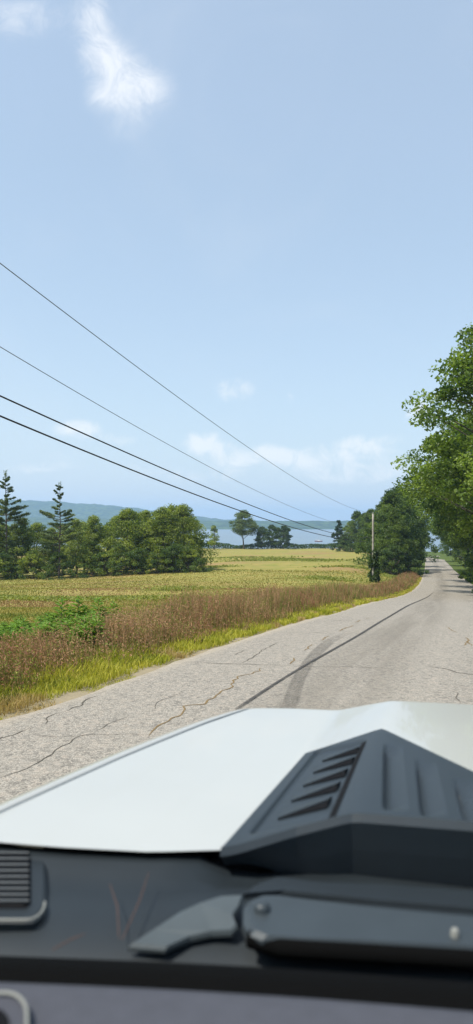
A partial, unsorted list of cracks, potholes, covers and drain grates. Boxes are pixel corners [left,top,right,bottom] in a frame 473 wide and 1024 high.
crack [1,620,390,775]
